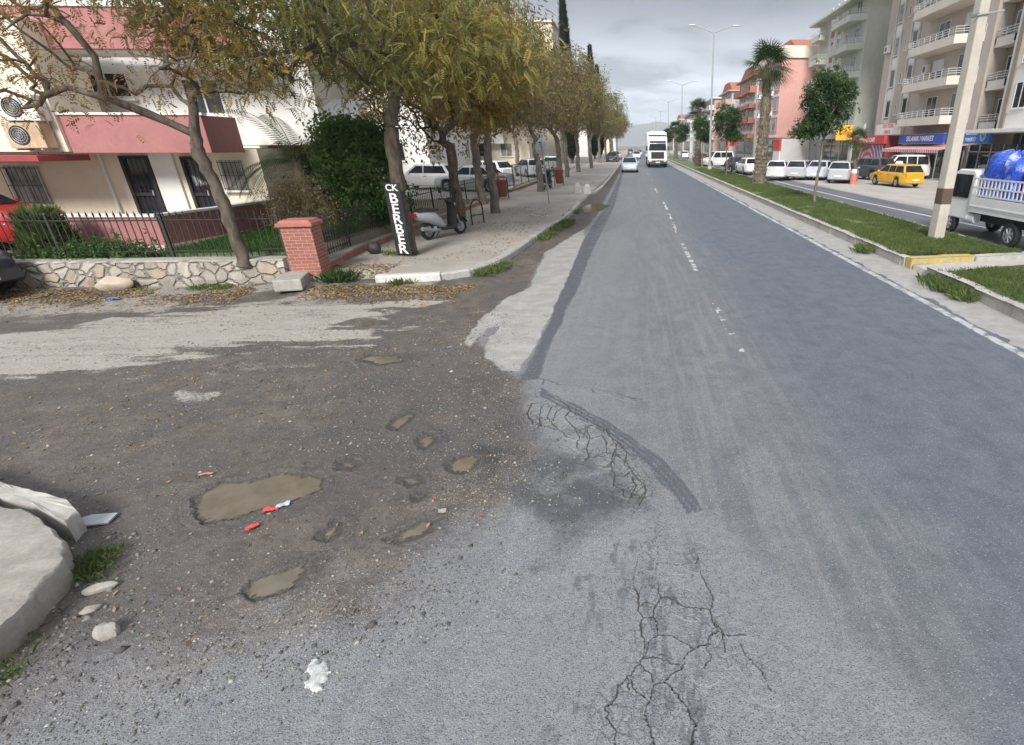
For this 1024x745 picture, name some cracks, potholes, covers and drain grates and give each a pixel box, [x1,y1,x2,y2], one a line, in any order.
pothole [408,427,449,455]
pothole [350,352,413,369]
pothole [434,449,492,480]
pothole [378,406,426,437]
crack [517,396,786,745]
pothole [323,452,374,478]
pothole [371,510,450,555]
pothole [223,551,325,615]
pothole [383,468,438,494]
pothole [178,465,336,531]
